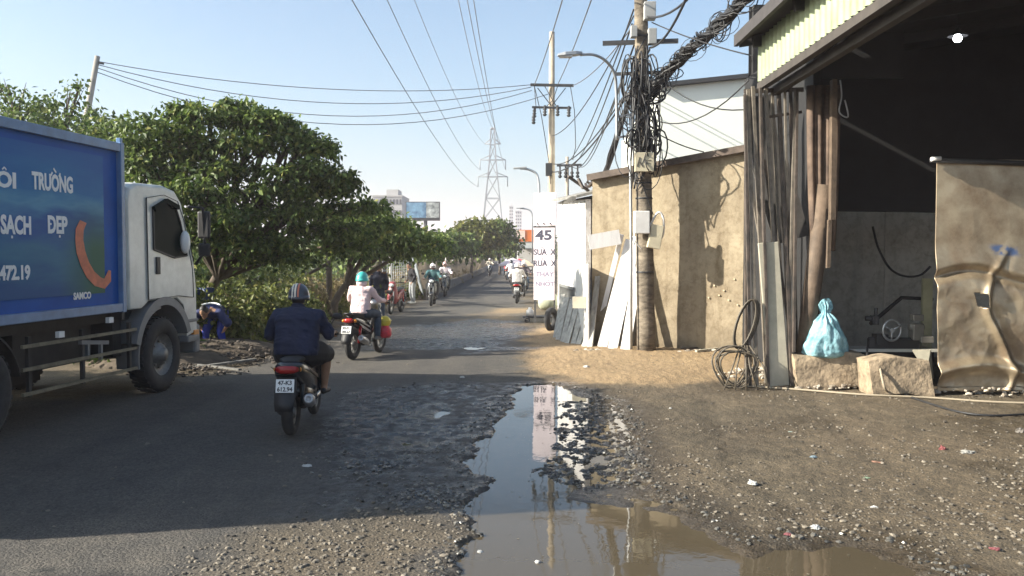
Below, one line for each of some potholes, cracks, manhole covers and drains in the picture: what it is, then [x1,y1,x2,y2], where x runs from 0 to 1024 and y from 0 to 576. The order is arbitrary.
pothole [440,383,950,576]
